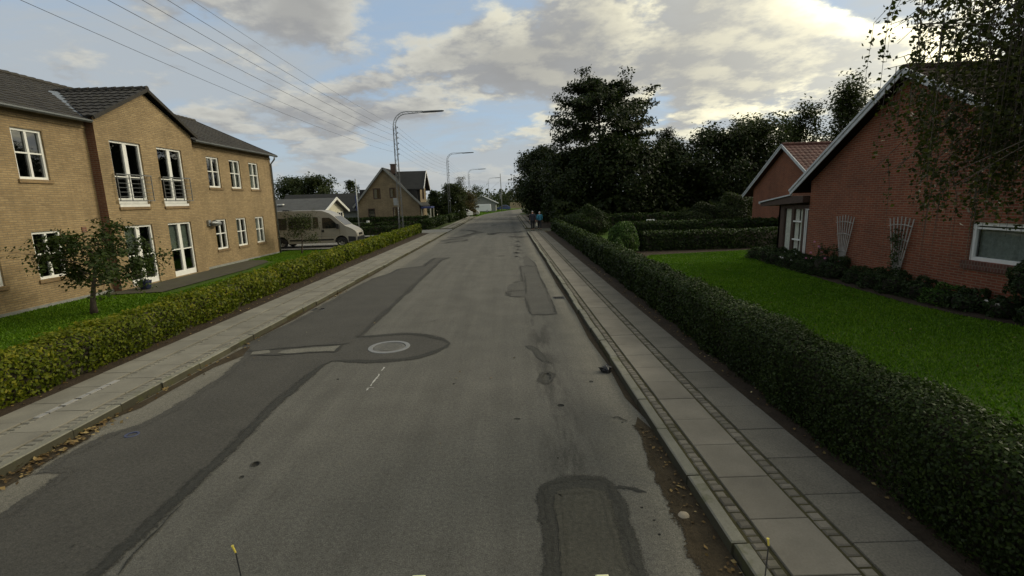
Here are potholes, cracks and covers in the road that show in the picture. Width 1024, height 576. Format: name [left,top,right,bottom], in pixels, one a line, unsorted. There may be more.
pothole [536,371,556,385]
manhole cover [368,341,410,354]
